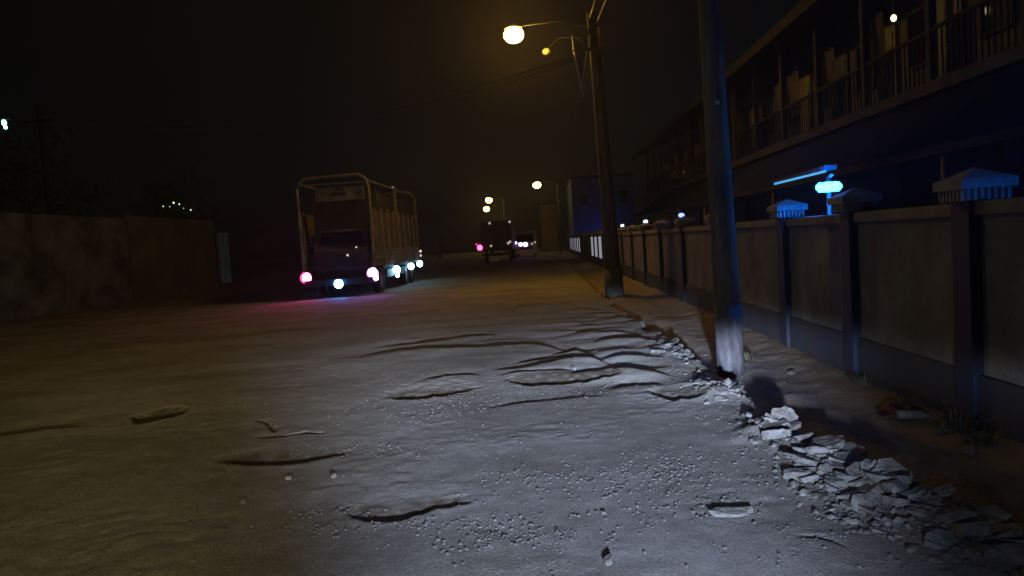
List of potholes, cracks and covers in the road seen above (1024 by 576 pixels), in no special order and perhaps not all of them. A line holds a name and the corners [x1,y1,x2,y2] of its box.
pothole [306,480,499,529]
crack [232,416,346,444]
pothole [369,378,494,402]
pothole [482,363,635,388]
